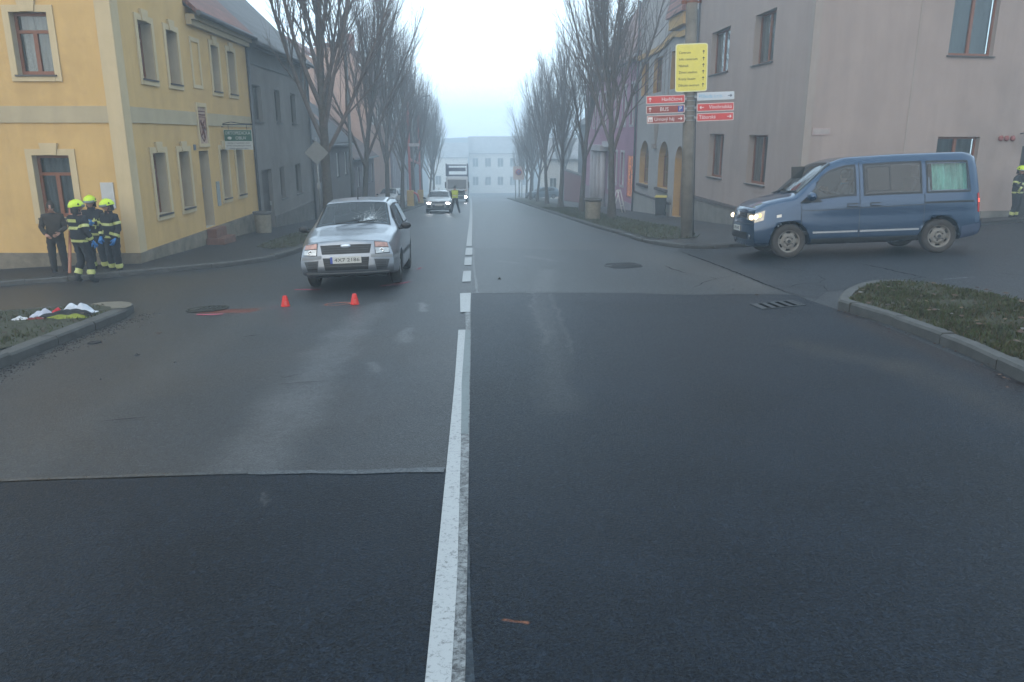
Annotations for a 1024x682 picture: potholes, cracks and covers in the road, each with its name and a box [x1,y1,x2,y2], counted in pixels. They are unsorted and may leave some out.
drain grate [750,300,806,309]
